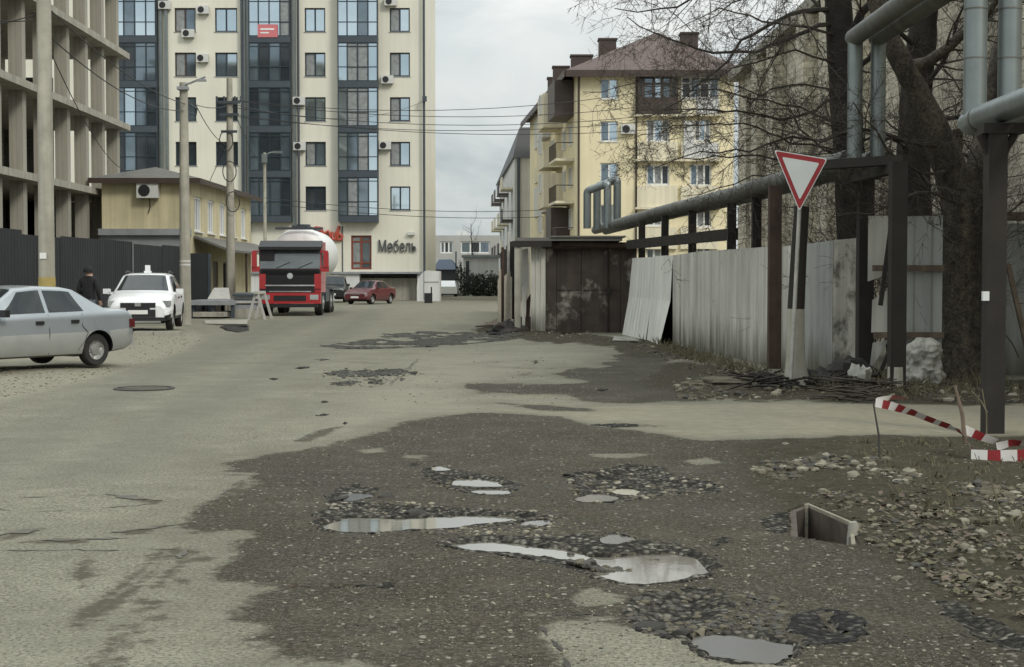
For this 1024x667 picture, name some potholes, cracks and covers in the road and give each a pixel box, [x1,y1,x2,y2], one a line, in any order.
pothole [309,502,553,535]
crack [0,524,191,562]
pothole [565,464,731,503]
pothole [325,483,379,503]
pothole [418,464,523,495]
pothole [680,628,804,666]
pothole [785,608,872,646]
pothole [433,533,723,587]
crack [3,494,160,511]
